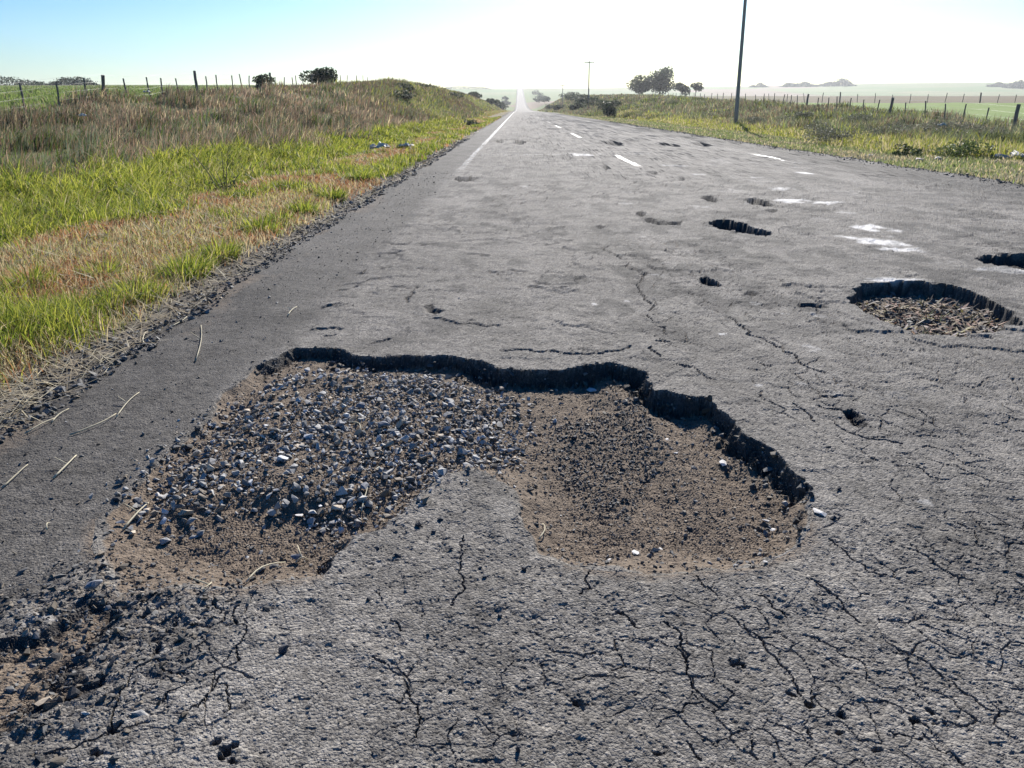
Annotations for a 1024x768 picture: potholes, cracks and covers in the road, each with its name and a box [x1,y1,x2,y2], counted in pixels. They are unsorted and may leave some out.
pothole [92,347,813,599]
pothole [708,218,773,237]
pothole [974,252,1024,270]
pothole [742,197,776,207]
pothole [843,408,868,428]
crack [334,236,1024,768]
pothole [846,280,1024,337]
crack [44,583,312,768]
